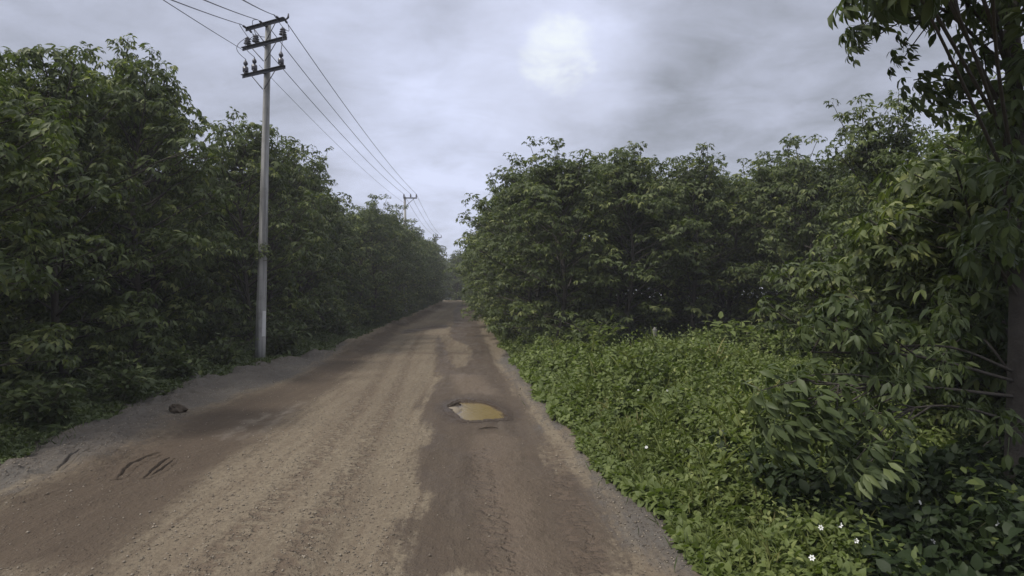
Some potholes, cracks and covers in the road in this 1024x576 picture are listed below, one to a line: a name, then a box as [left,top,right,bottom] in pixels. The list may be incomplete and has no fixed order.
pothole [441,398,514,423]
